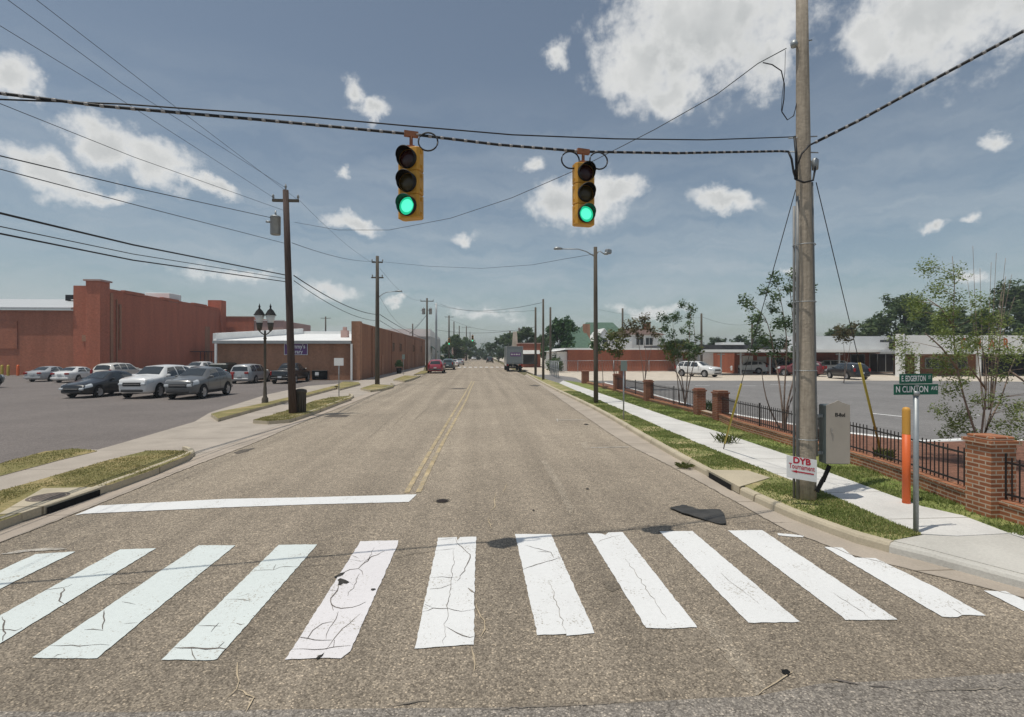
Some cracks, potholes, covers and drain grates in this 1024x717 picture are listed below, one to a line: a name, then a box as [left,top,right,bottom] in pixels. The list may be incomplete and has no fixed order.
crack [273,551,380,650]
drain grate [707,469,770,494]
crack [399,538,475,642]
crack [52,612,106,655]
manhole cover [25,492,71,502]
